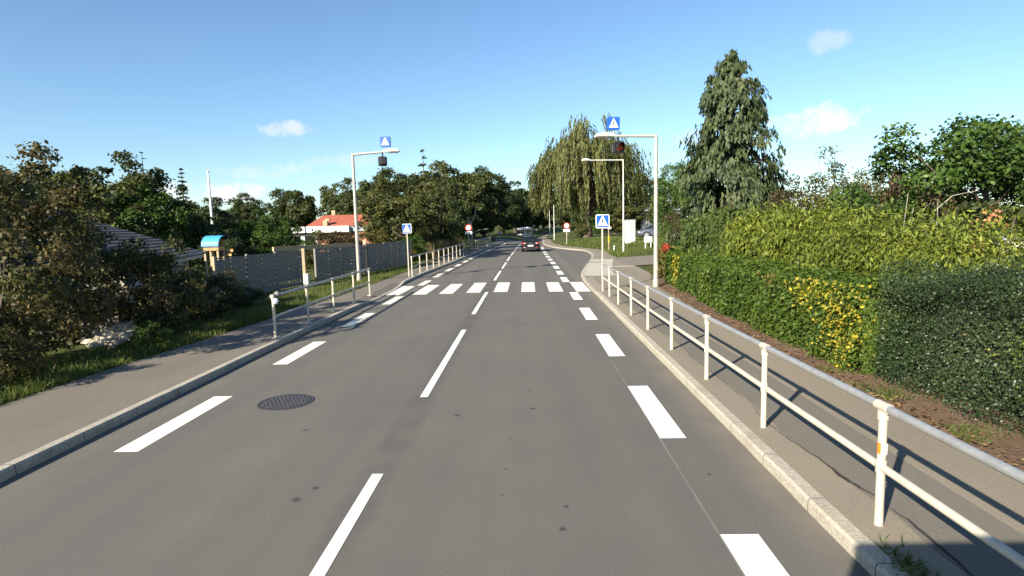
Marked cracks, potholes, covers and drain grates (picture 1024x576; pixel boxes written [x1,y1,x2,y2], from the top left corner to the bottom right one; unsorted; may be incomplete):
manhole cover [257,394,314,411]
